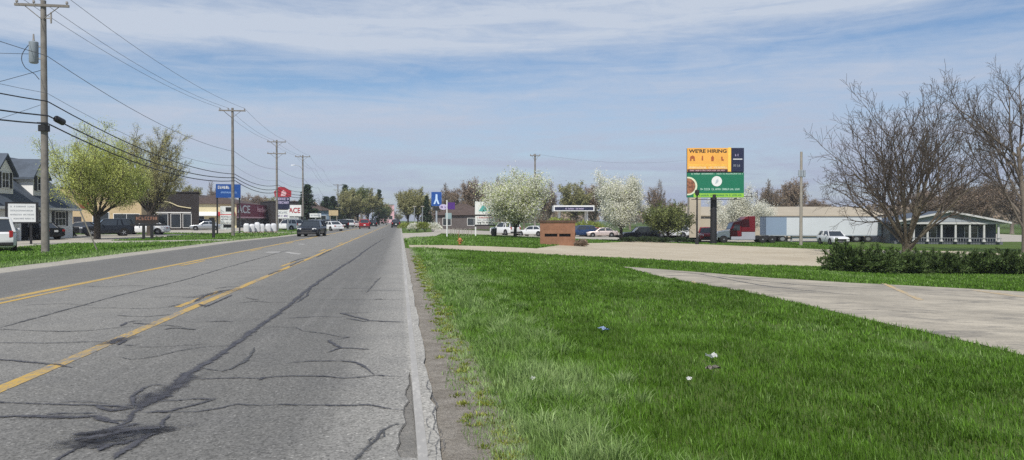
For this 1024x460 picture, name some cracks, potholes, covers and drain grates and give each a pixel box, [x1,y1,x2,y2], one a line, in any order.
crack [0,412,126,423]
crack [147,397,401,460]
crack [1,286,392,379]
